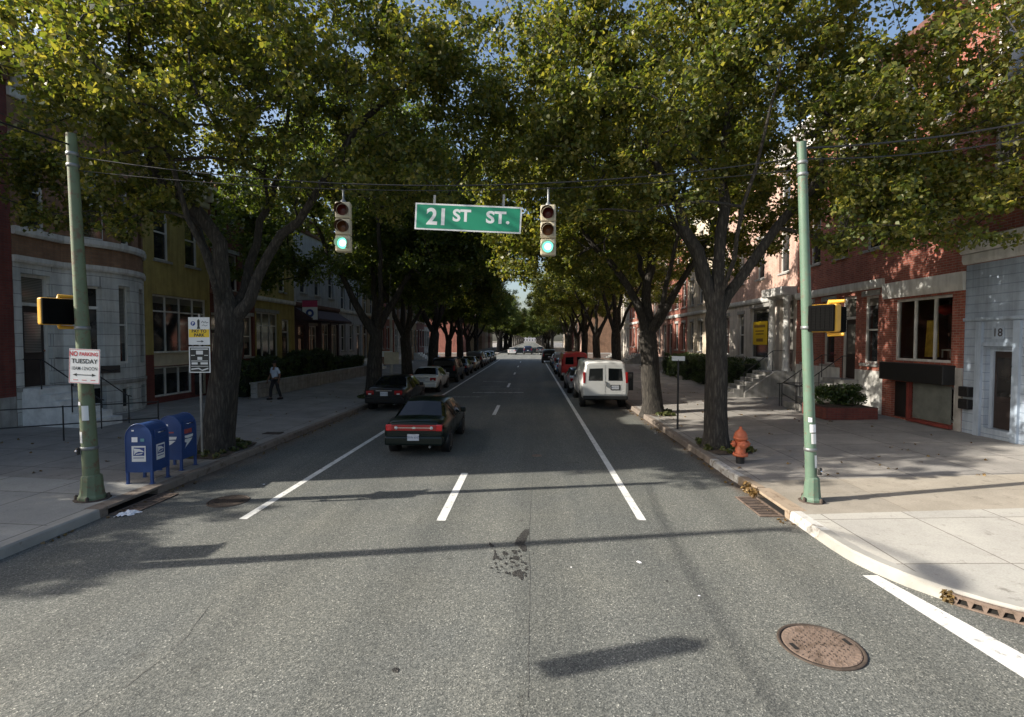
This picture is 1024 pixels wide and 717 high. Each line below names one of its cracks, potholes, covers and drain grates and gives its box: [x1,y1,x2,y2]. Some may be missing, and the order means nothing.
manhole cover [777,623,869,671]
drain grate [84,484,179,518]
pothole [489,529,537,584]
crack [78,601,214,716]
manhole cover [206,495,250,508]
drain grate [735,488,807,520]
drain grate [952,593,1024,625]
